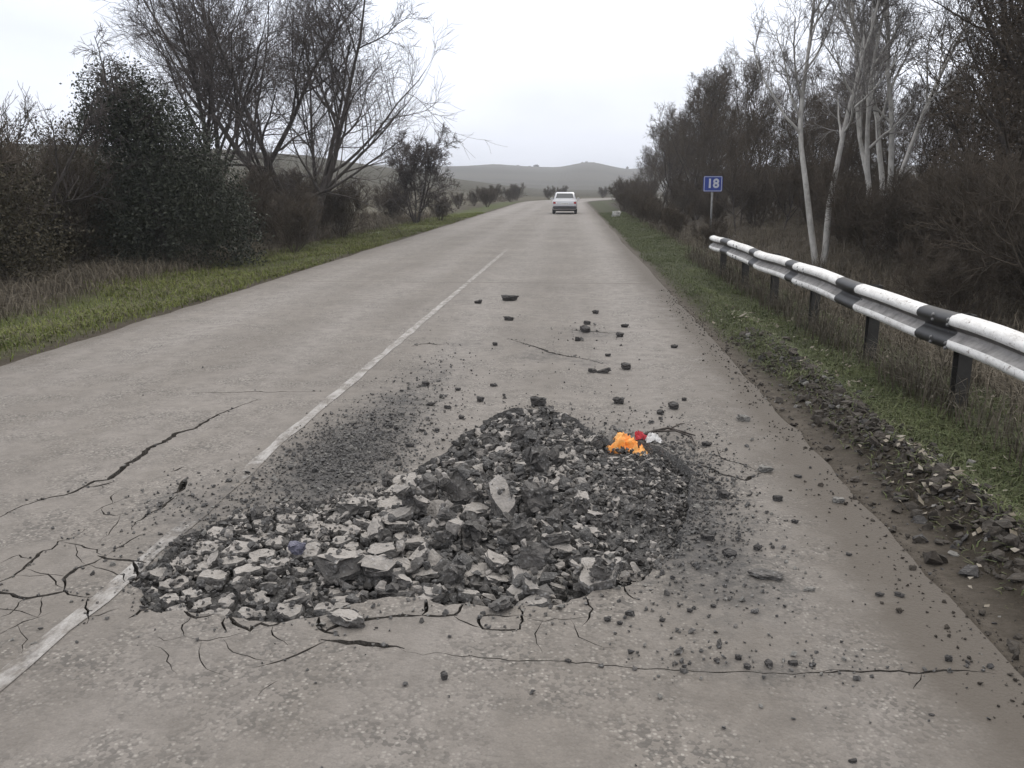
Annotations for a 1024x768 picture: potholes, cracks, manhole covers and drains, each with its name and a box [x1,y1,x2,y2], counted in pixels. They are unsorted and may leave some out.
crack [517,341,602,364]
pothole [130,408,695,623]
crack [0,391,994,689]
